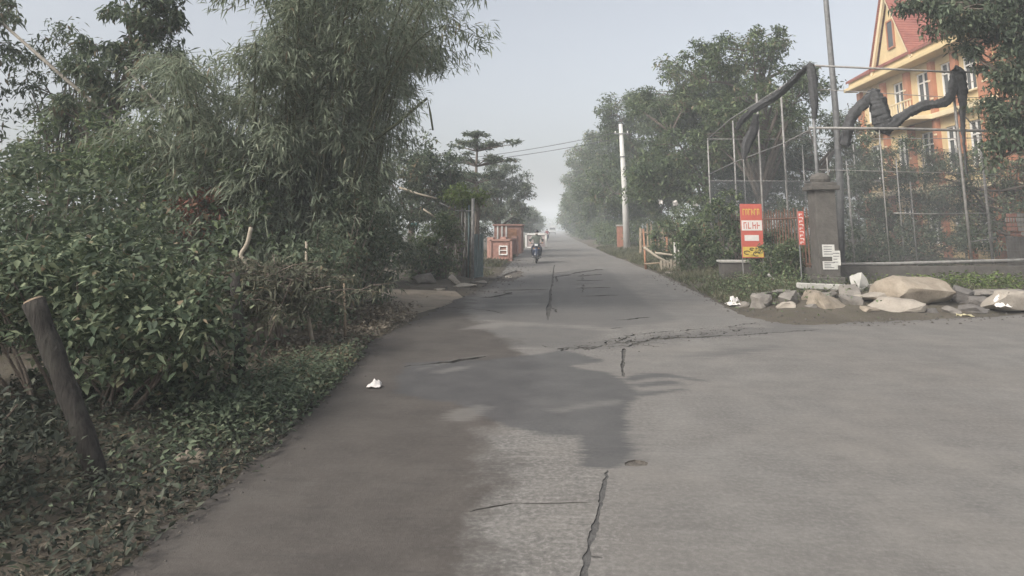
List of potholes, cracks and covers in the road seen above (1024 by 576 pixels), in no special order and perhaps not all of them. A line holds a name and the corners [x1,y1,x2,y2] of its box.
crack [470,502,589,512]
crack [405,356,486,367]
crack [448,269,613,313]
crack [542,317,827,351]
